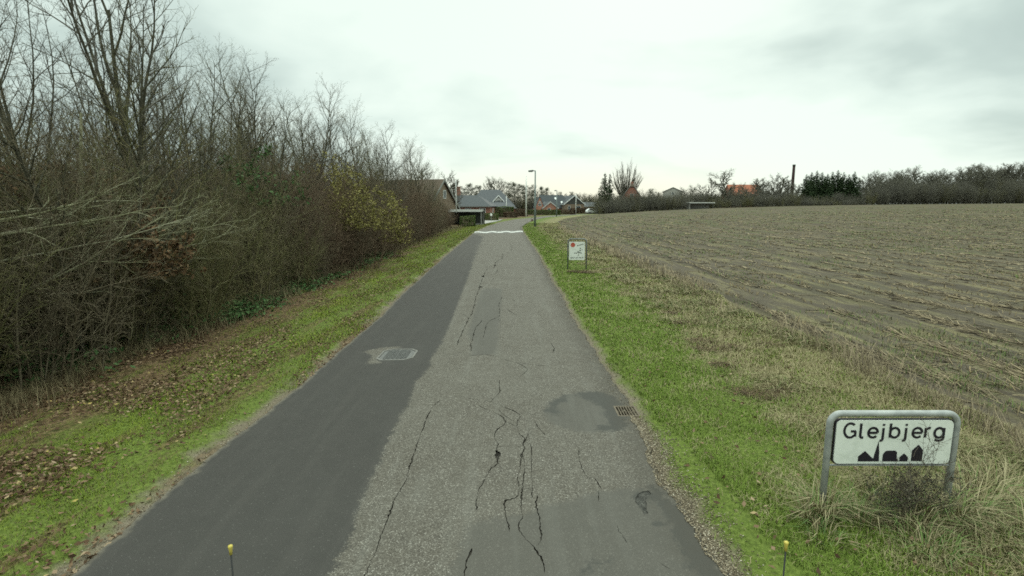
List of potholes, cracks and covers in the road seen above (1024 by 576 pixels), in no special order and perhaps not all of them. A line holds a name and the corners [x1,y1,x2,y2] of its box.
crack [364,401,439,576]
crack [450,246,555,376]
crack [464,380,545,573]
manhole cover [376,349,418,361]
drain grate [613,406,641,417]
